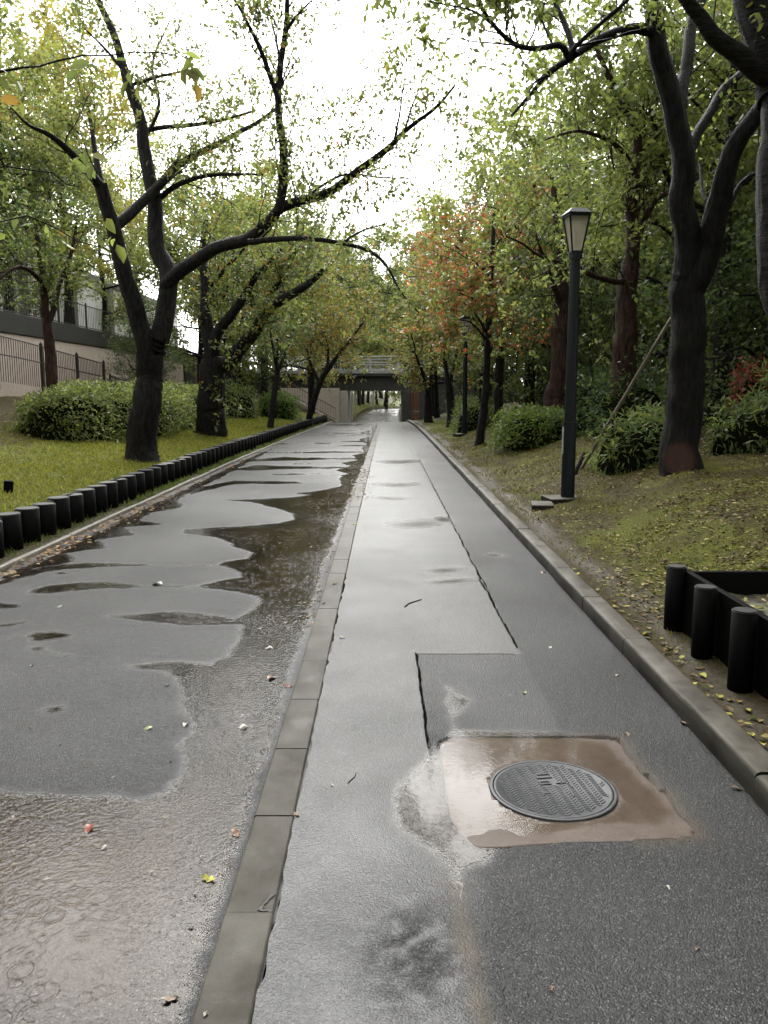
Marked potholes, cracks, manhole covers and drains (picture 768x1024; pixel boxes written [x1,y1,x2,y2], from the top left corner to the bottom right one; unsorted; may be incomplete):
manhole cover [489,760,618,822]
